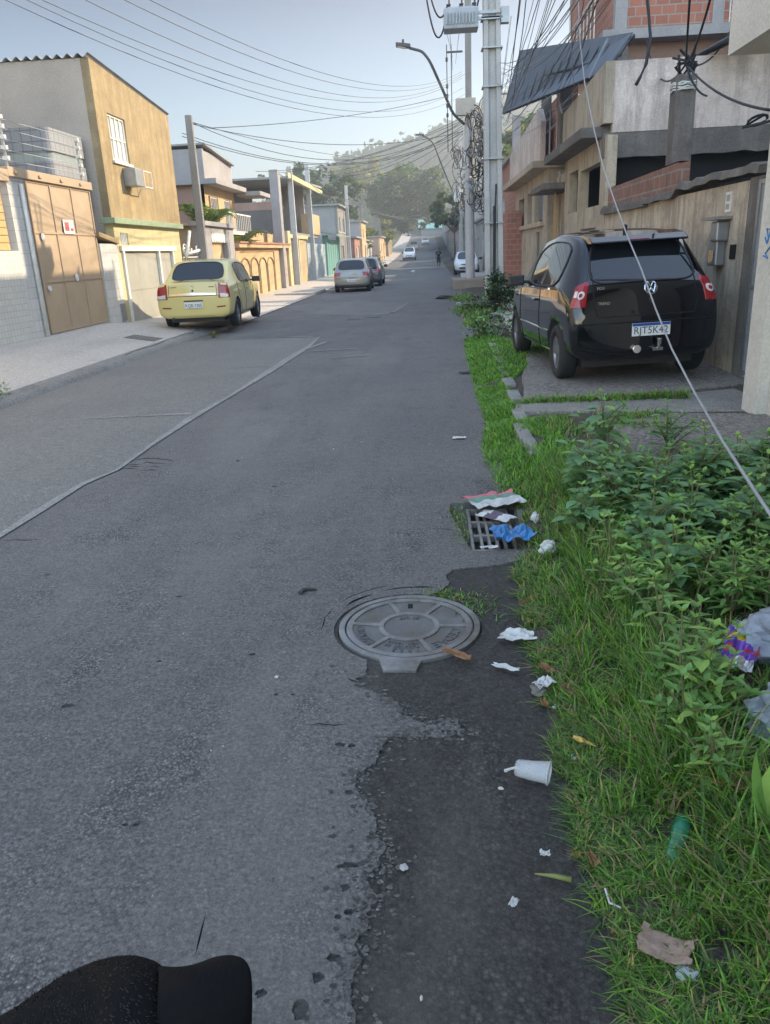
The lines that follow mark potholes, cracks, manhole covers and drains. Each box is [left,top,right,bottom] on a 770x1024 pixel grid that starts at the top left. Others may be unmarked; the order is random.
drain grate [449,503,523,551]
crack [118,458,172,471]
manhole cover [339,595,480,673]
crack [321,585,429,630]
